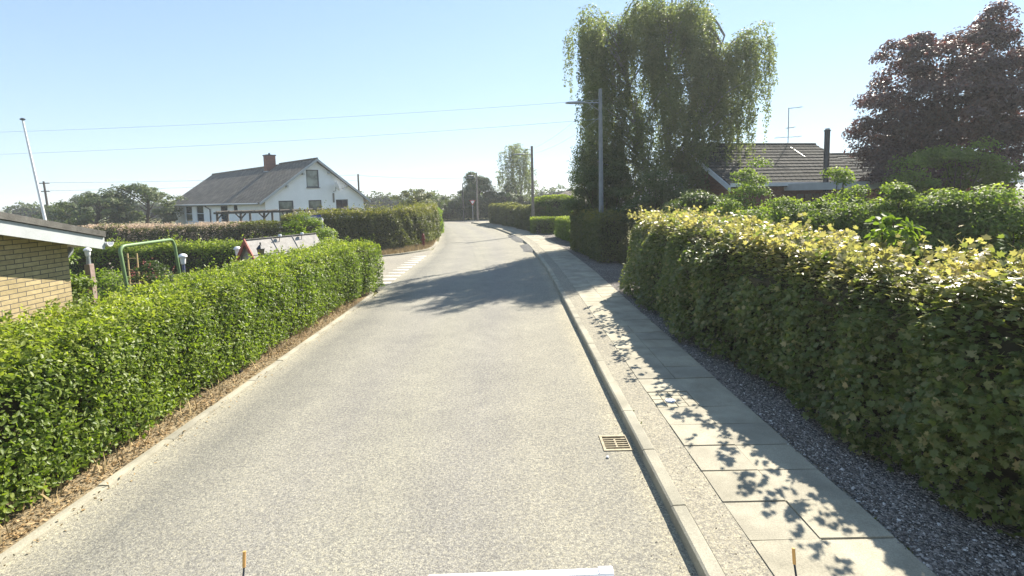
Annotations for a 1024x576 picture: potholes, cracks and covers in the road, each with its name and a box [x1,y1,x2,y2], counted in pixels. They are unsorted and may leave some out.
drain grate [598,435,634,451]
